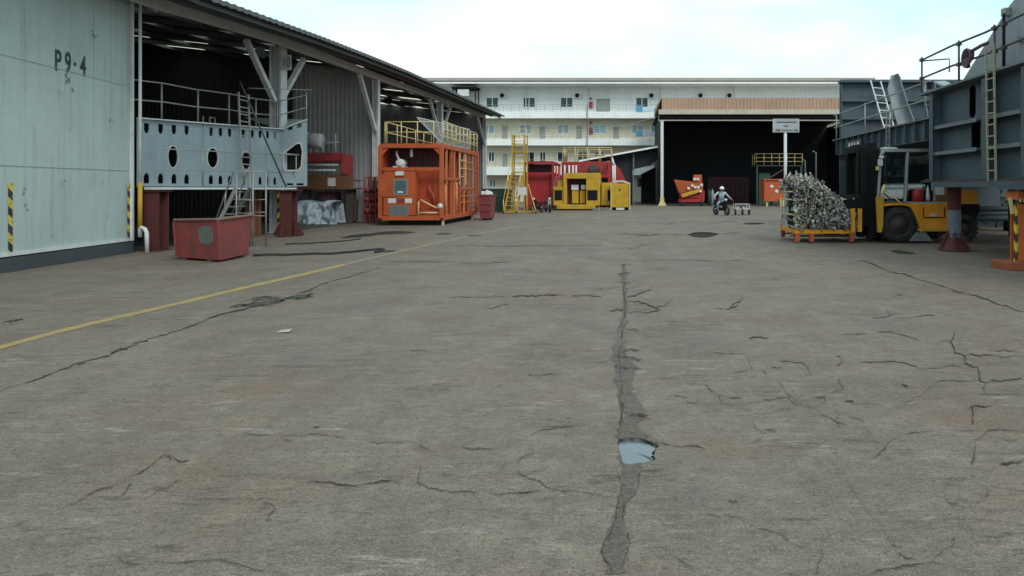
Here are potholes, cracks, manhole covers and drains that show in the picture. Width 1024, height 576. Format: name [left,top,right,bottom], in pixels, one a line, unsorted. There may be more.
crack [417,423,616,505]
crack [842,260,1024,513]
crack [385,221,743,436]
crack [600,471,692,569]
crack [57,453,399,574]
pothole [618,438,659,464]
crack [656,336,934,483]
pothole [236,297,286,307]
crack [2,267,382,391]
